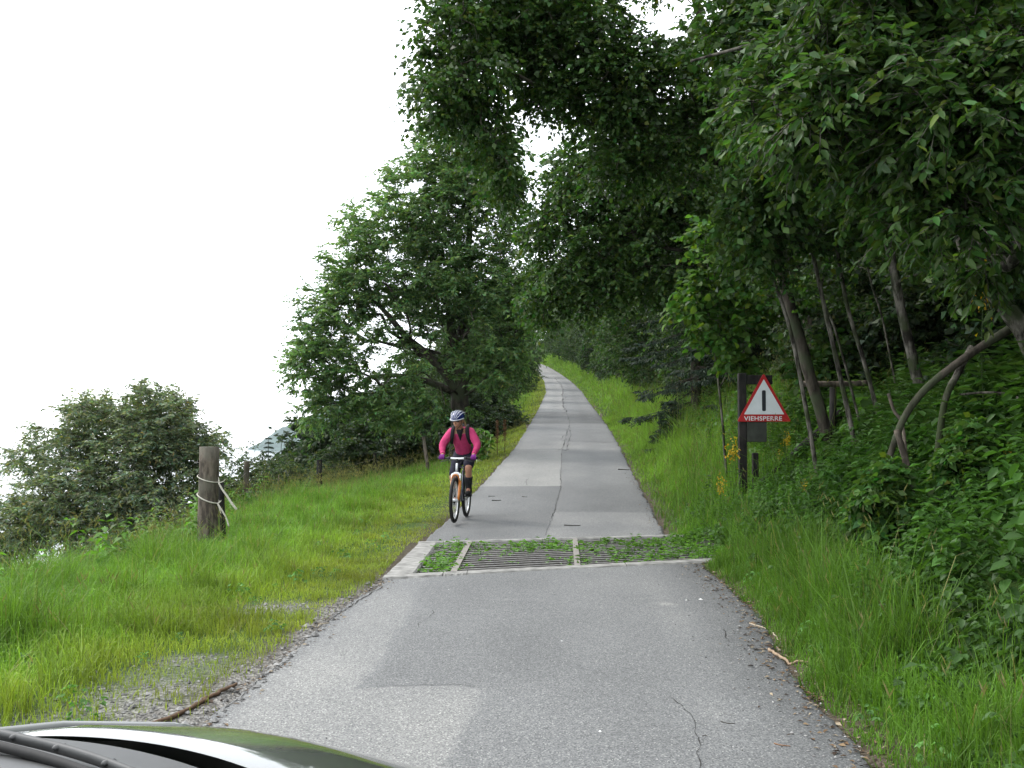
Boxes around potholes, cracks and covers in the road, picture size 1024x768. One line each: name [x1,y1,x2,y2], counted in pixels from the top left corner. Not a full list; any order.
crack [671,697,701,766]
crack [546,385,571,532]
